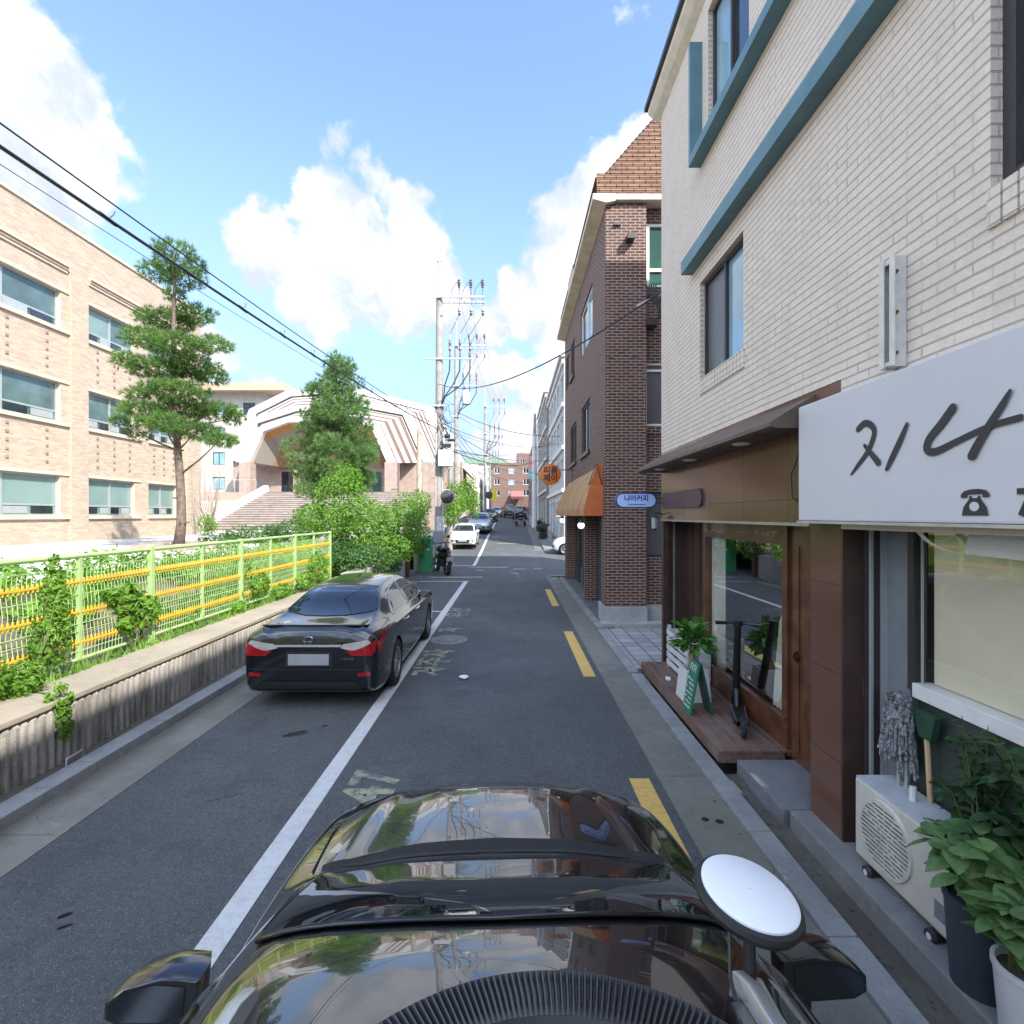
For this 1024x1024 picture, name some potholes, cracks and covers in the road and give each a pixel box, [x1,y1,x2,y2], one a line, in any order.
manhole cover [430,635,467,644]
